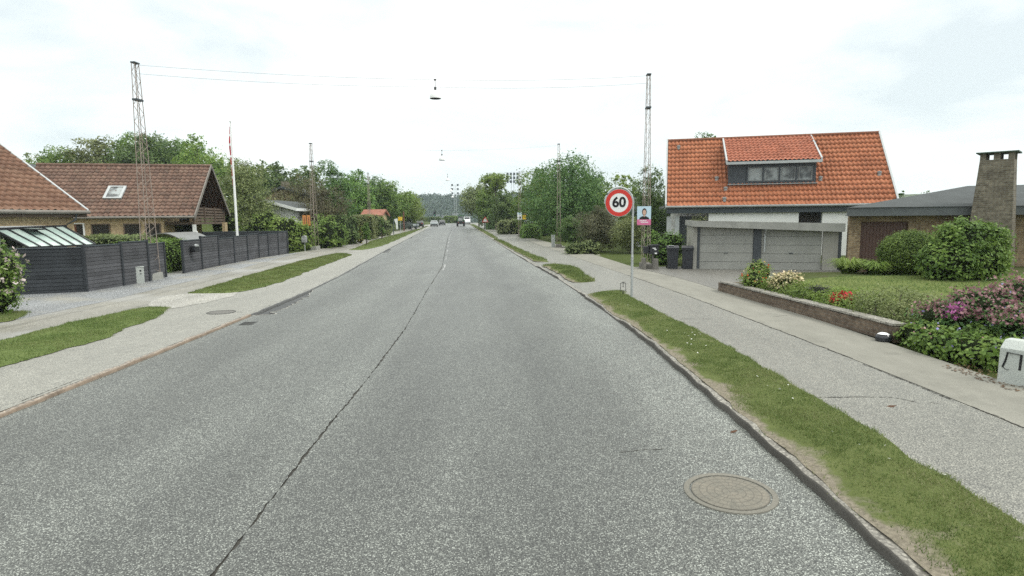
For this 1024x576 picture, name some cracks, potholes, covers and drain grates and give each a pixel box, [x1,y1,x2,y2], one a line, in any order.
manhole cover [683,473,779,515]
crack [209,230,452,576]
